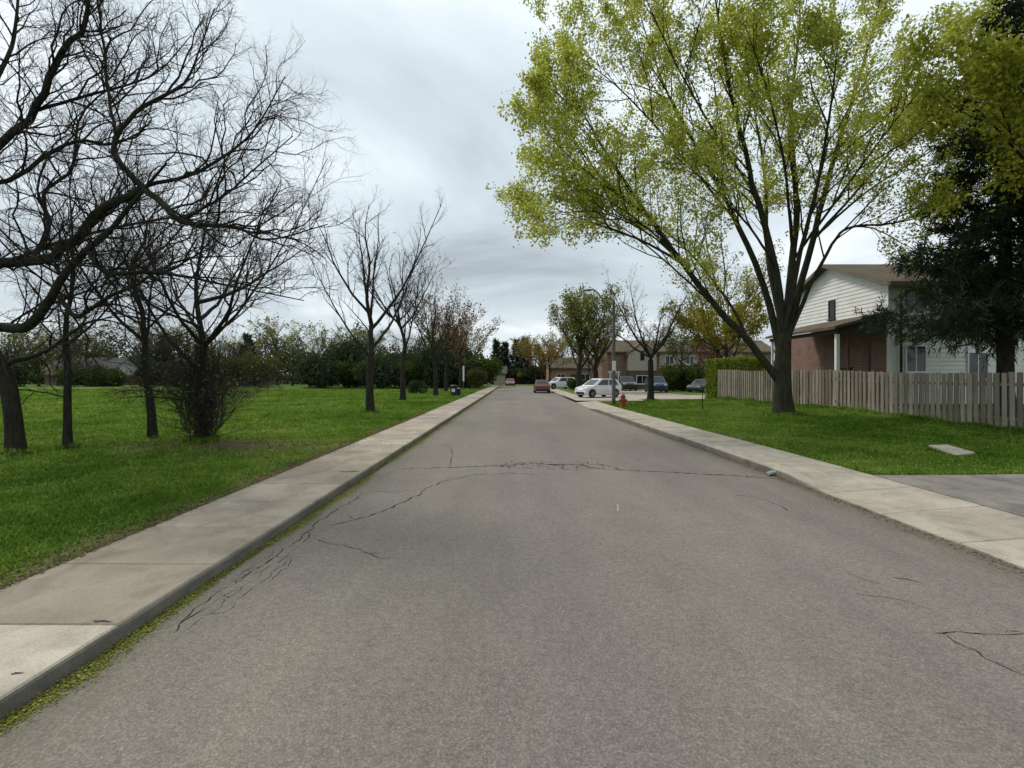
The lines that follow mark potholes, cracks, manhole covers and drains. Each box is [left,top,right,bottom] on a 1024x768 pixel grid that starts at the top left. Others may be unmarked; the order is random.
crack [174,445,775,633]
crack [937,631,1024,676]
